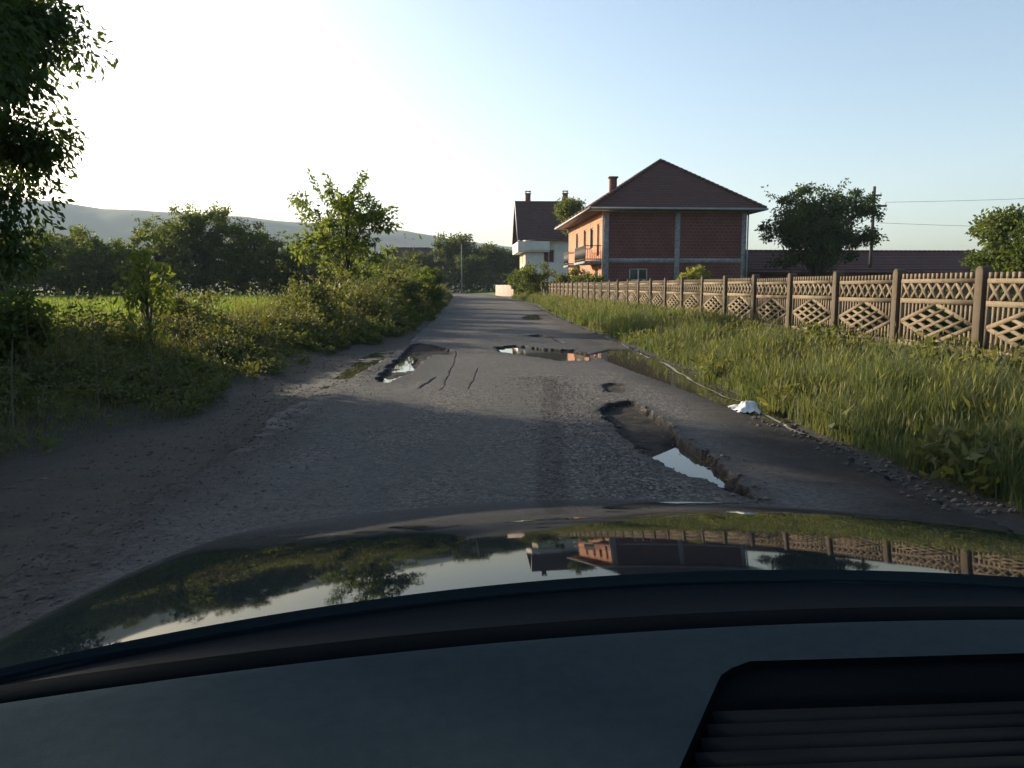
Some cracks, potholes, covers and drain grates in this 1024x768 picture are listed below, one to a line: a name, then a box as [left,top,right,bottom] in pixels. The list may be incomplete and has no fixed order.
pothole [494,345,605,361]
pothole [593,383,633,394]
pothole [587,399,797,505]
pothole [375,343,457,382]
crack [420,353,478,389]
